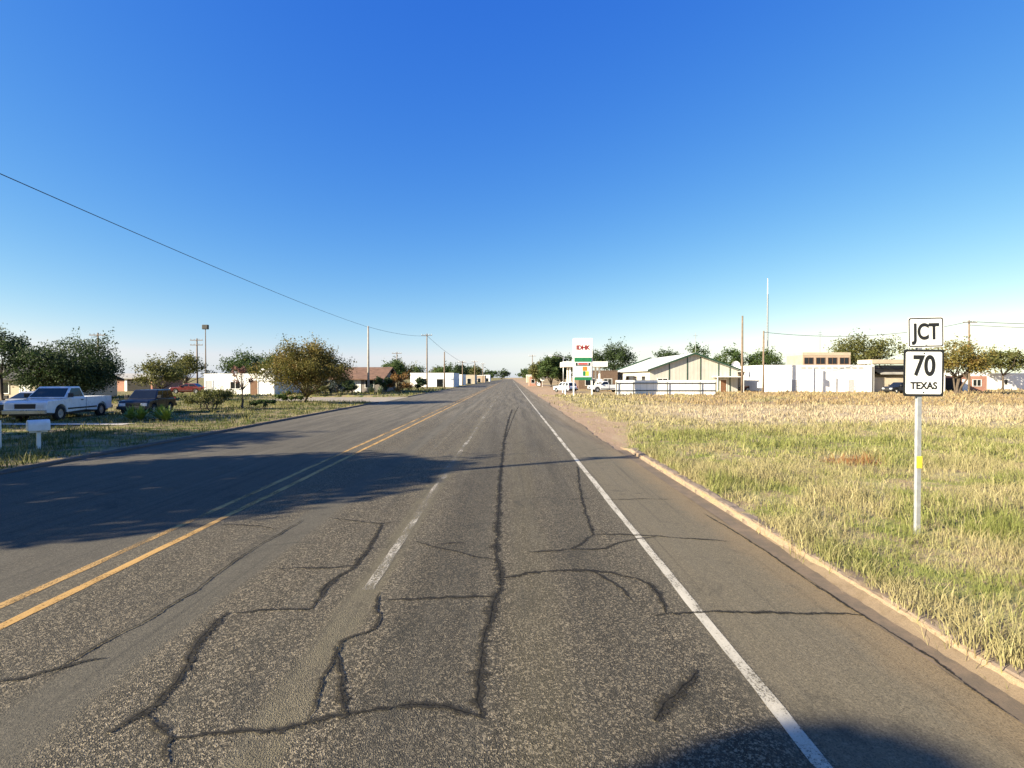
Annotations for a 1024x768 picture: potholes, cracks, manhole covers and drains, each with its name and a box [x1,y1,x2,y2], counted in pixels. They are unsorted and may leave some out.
crack [0,410,1017,764]
